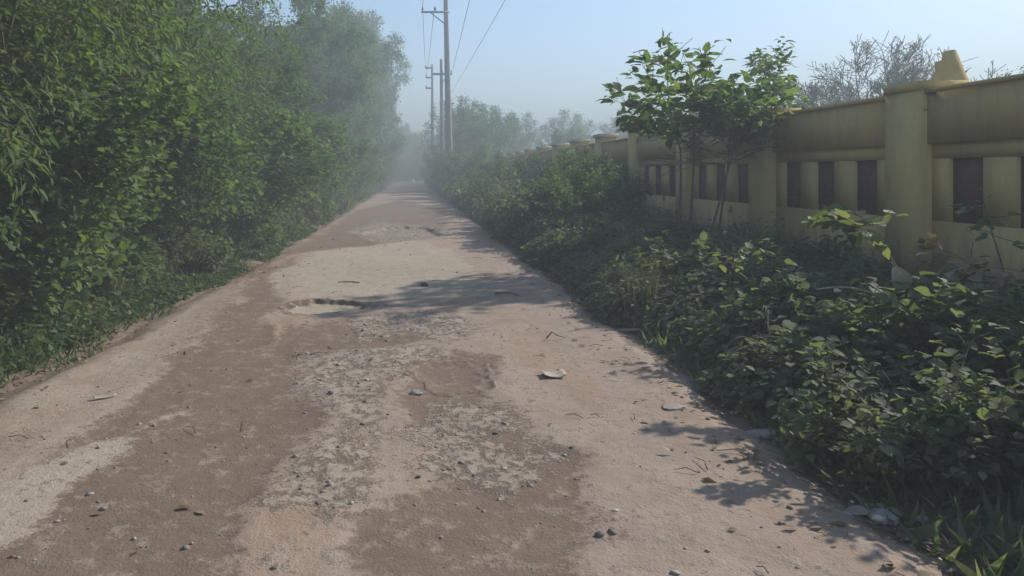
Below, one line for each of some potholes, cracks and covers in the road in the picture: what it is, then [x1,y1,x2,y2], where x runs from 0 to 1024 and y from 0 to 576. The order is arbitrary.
pothole [356,225,447,240]
pothole [275,298,375,316]
